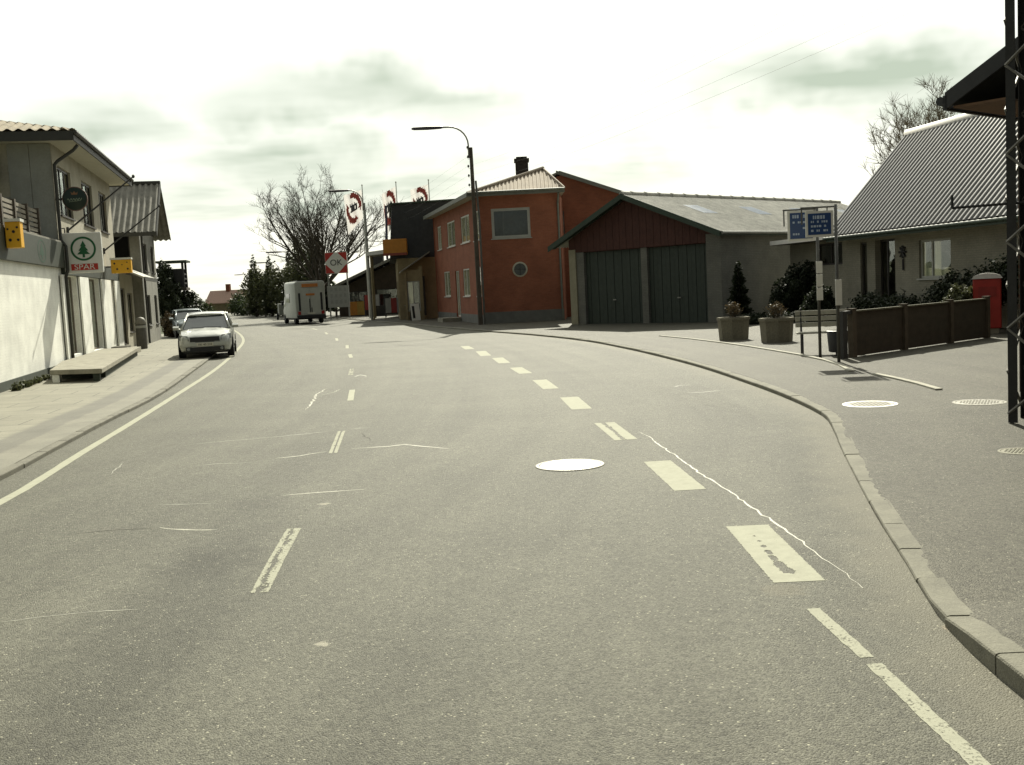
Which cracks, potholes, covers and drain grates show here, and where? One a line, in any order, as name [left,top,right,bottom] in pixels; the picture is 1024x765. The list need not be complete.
crack [200,427,449,458]
crack [5,609,136,622]
manhole cover [997,447,1024,455]
manhole cover [535,459,605,471]
crack [640,432,863,588]
